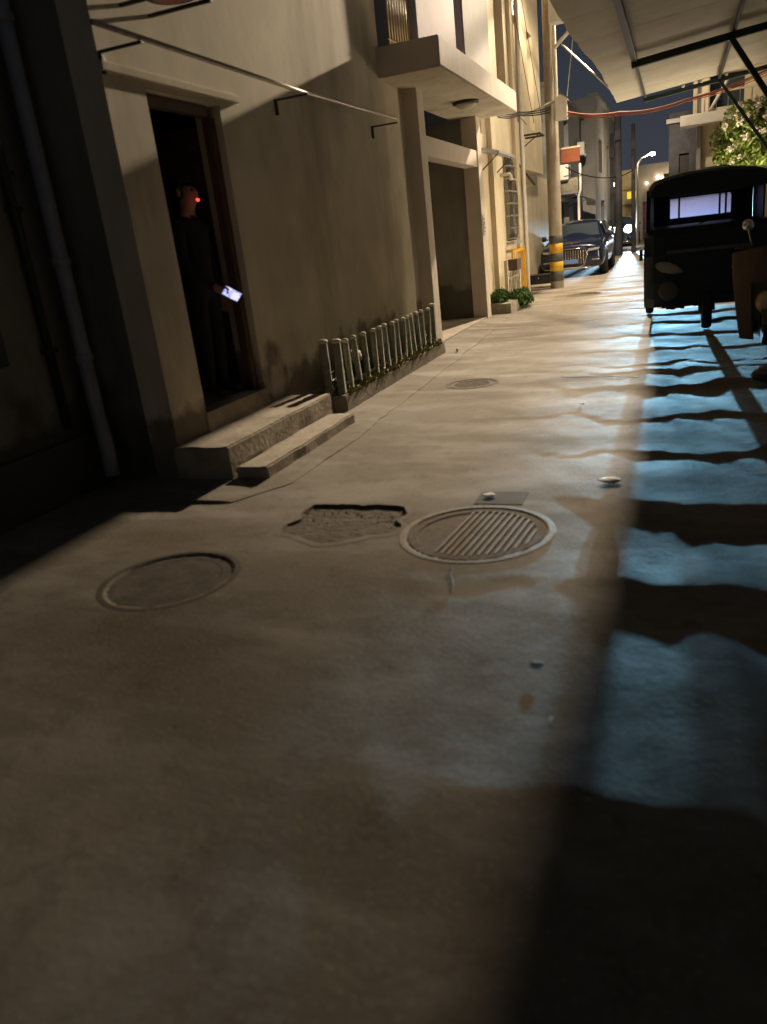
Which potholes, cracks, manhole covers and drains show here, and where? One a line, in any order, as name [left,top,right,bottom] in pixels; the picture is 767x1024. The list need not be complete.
pothole [272,502,416,546]
manhole cover [445,378,499,389]
utility cover [474,491,529,505]
manhole cover [96,551,241,612]
crack [446,564,454,592]
